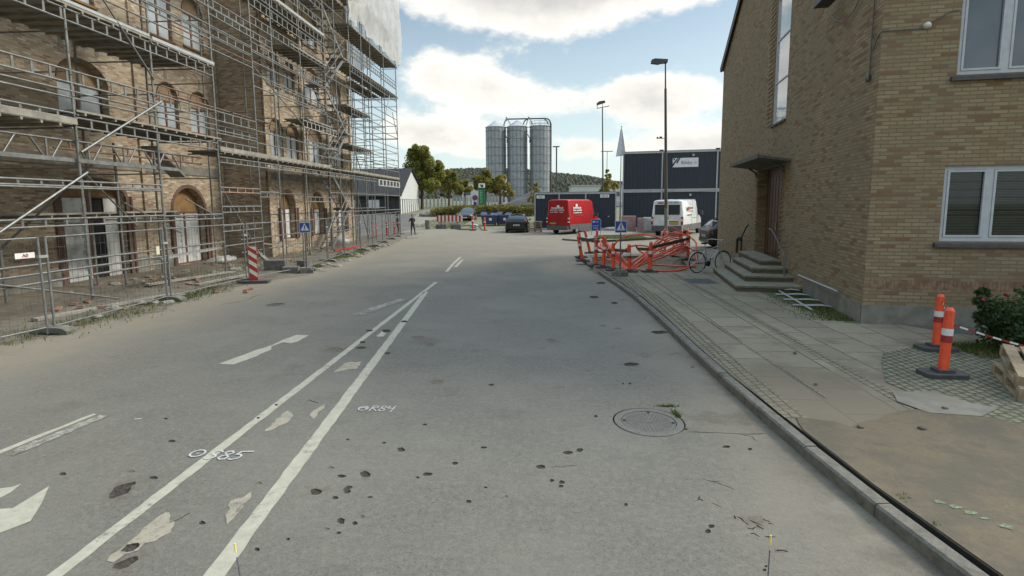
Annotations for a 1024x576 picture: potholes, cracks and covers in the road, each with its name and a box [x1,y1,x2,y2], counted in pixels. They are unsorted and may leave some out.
pothole [109,481,136,499]
manhole cover [614,408,684,437]
crack [698,479,788,552]
pothole [113,556,138,570]
